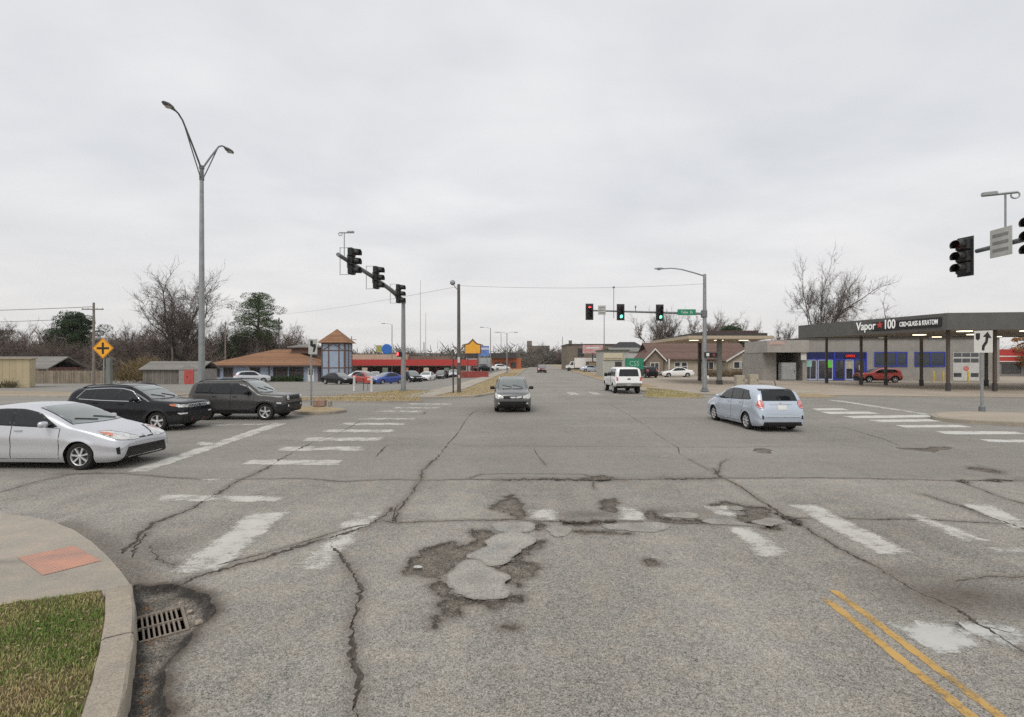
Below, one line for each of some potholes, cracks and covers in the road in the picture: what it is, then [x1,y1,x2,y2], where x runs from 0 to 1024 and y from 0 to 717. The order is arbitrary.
crack [149,411,999,717]
drain grate [137,606,190,643]
pothole [489,495,527,519]
pothole [599,498,620,513]
pothole [429,581,524,617]
pothole [710,501,772,524]
pothole [128,584,216,717]
pothole [401,529,497,579]
